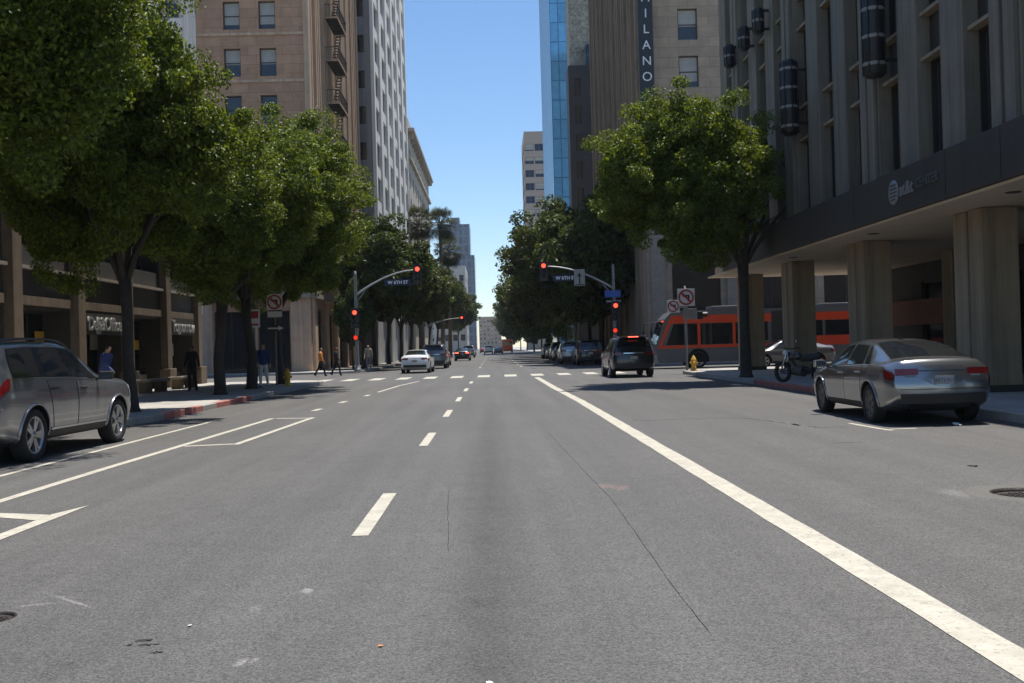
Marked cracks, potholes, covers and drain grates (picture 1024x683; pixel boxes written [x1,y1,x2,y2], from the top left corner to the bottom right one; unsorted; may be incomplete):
crack [554,439,710,633]
manhole cover [964,485,1024,502]
manhole cover [0,611,18,622]
